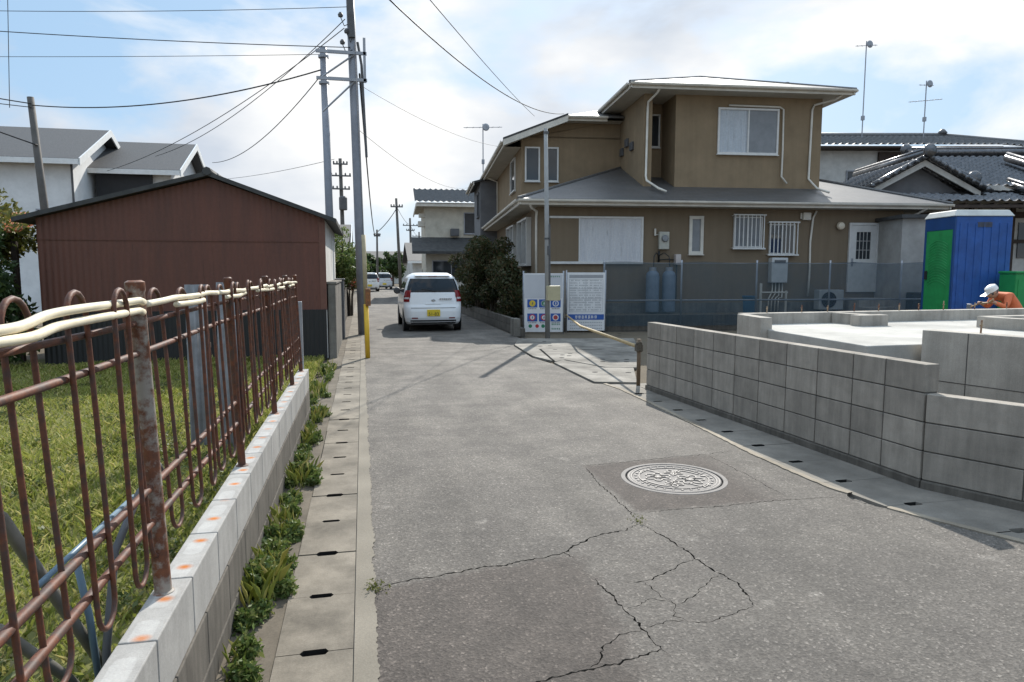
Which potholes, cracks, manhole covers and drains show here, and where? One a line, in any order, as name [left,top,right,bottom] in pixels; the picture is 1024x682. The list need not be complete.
crack [382,450,832,587]
manhole cover [621,463,728,495]
crack [536,524,753,682]
